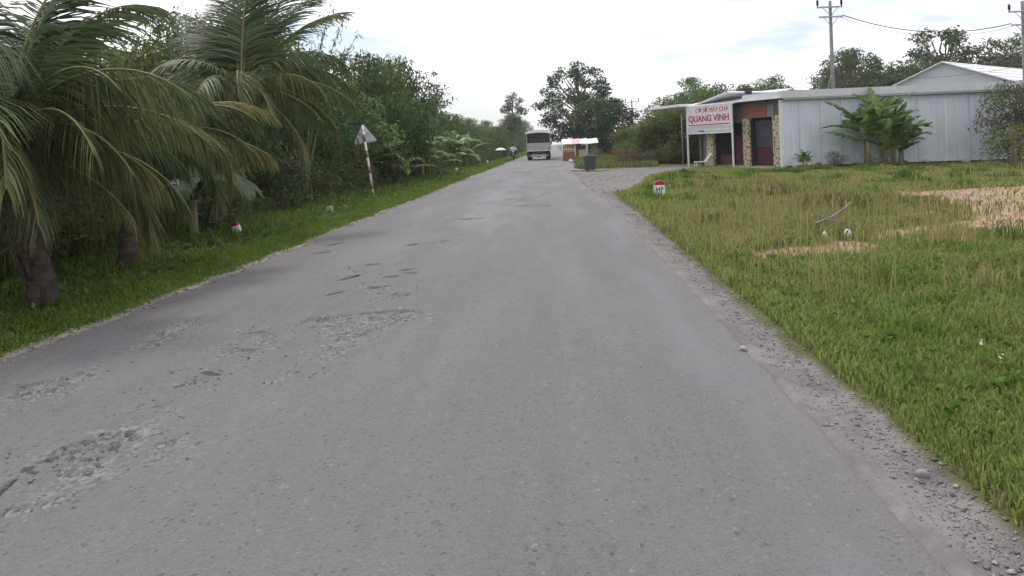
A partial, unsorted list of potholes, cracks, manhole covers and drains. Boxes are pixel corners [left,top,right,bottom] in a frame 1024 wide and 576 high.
pothole [303,342,360,357]
pothole [284,307,436,344]
pothole [212,344,280,359]
pothole [225,326,296,349]
pothole [0,367,109,408]
pothole [16,424,159,489]
pothole [196,365,240,379]
pothole [374,290,421,300]
